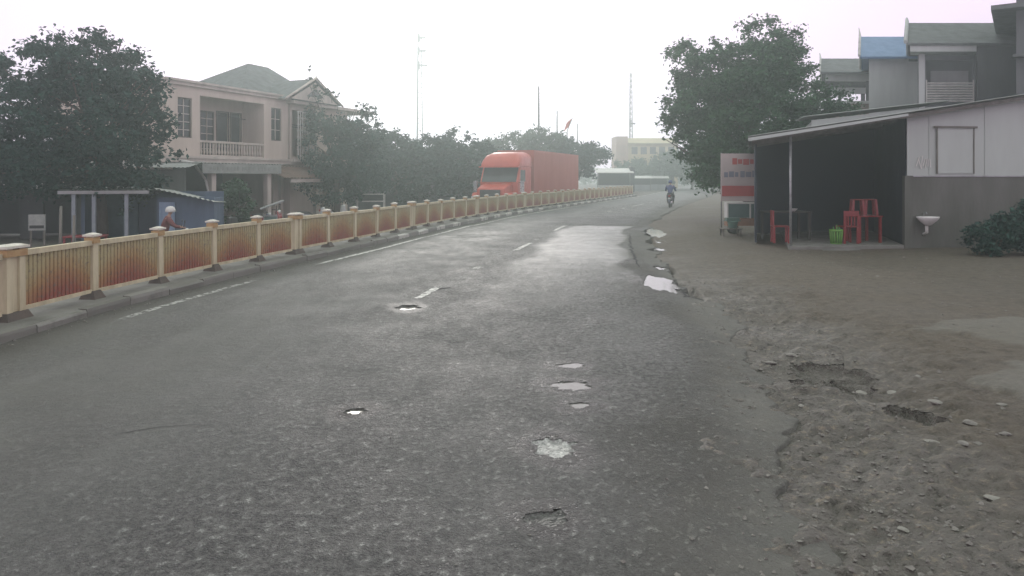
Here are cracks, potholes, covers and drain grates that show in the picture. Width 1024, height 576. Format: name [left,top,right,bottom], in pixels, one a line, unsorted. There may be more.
pothole [642,274,681,294]
pothole [522,509,568,527]
pothole [784,361,879,400]
pothole [531,437,577,458]
pothole [646,228,667,238]
pothole [882,405,953,426]
pothole [550,382,593,391]
